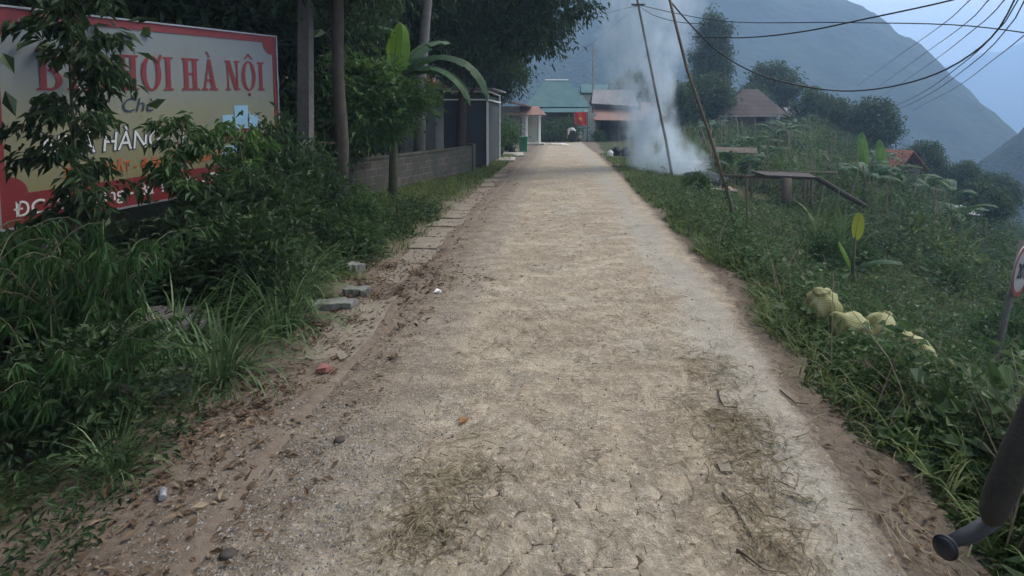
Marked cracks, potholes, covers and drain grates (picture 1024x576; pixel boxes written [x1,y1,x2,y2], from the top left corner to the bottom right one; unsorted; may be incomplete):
crack [377,474,663,576]
